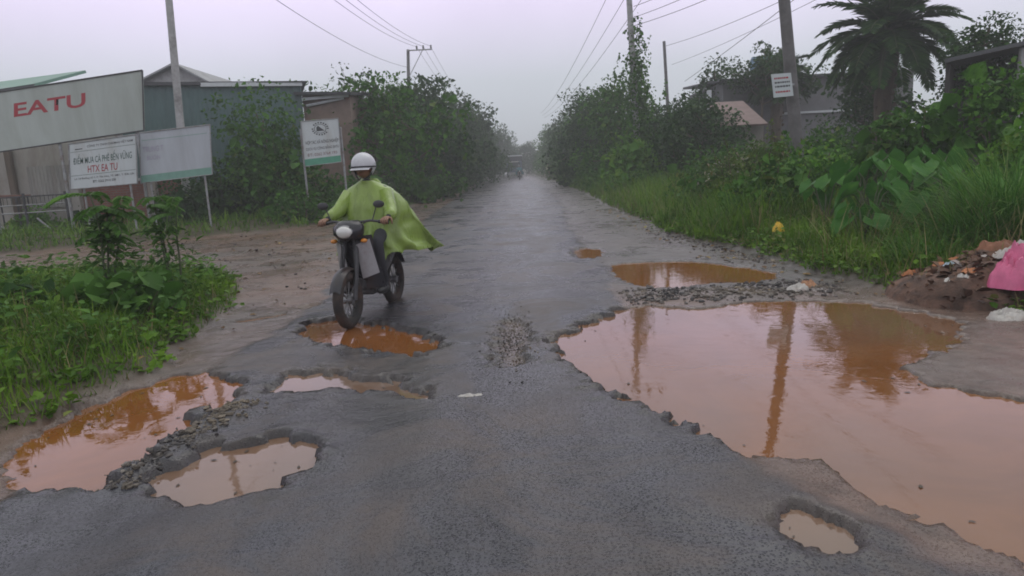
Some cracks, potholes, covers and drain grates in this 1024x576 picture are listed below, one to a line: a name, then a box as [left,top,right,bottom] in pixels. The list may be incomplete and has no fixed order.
pothole [284,313,458,359]
pothole [256,363,441,400]
pothole [598,260,785,289]
pothole [566,246,608,259]
pothole [121,426,333,509]
pothole [541,298,1024,575]
pothole [478,306,547,383]
pothole [0,360,256,502]
